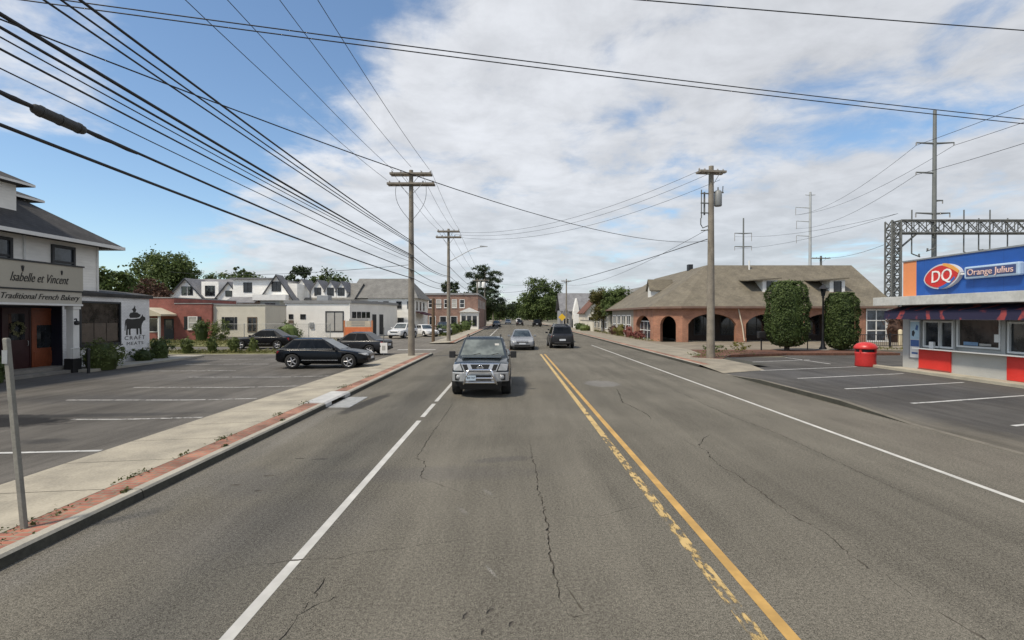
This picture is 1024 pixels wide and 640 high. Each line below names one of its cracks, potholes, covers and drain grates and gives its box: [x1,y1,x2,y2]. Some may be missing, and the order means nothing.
crack [530,446,635,625]
crack [415,404,471,495]
crack [279,578,350,640]
crack [688,436,987,640]
